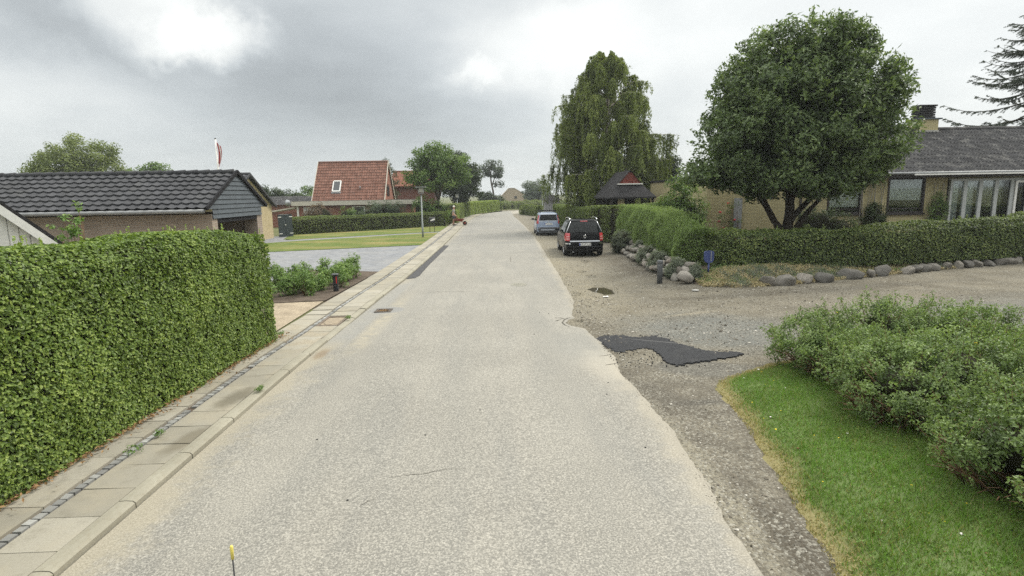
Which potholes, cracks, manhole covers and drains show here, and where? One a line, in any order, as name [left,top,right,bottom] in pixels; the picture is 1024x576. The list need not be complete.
pothole [582,285,621,296]
manhole cover [316,316,348,326]
